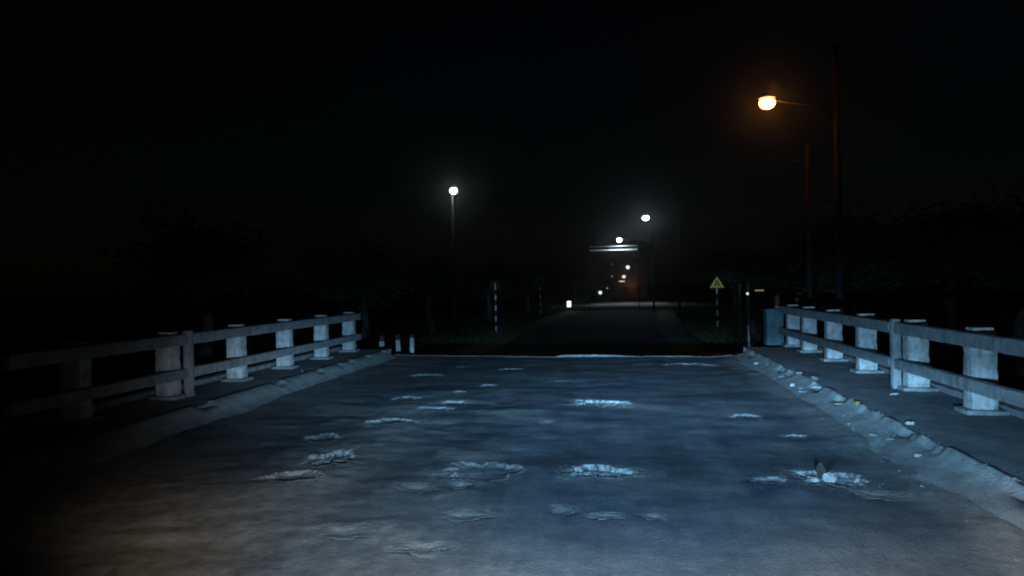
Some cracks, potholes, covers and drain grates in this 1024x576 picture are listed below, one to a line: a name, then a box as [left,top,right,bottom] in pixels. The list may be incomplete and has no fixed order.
pothole [451,481,472,489]
pothole [551,505,576,515]
pothole [298,432,348,443]
pothole [440,510,500,522]
pothole [355,417,428,427]
pothole [748,477,791,485]
pothole [567,399,642,408]
pothole [783,469,882,491]
pothole [385,541,454,558]
pothole [435,460,536,485]
pothole [558,463,649,480]
pothole [291,446,366,472]
